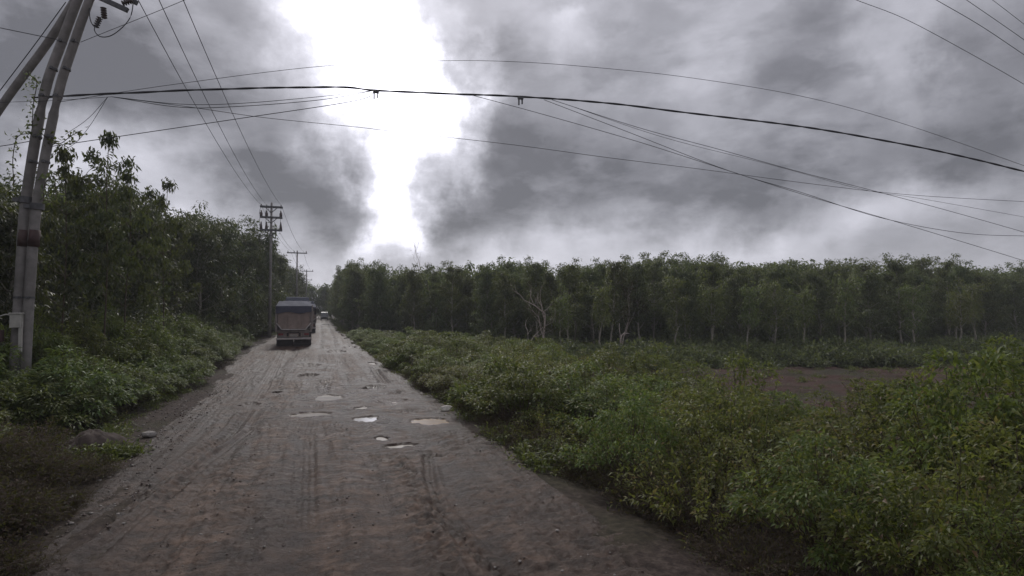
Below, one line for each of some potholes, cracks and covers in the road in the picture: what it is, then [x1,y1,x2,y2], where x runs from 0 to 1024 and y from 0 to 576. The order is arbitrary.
pothole [372,440,430,452]
pothole [357,383,393,392]
pothole [305,393,353,403]
pothole [399,416,459,428]
pothole [365,433,397,444]
pothole [344,414,387,424]
